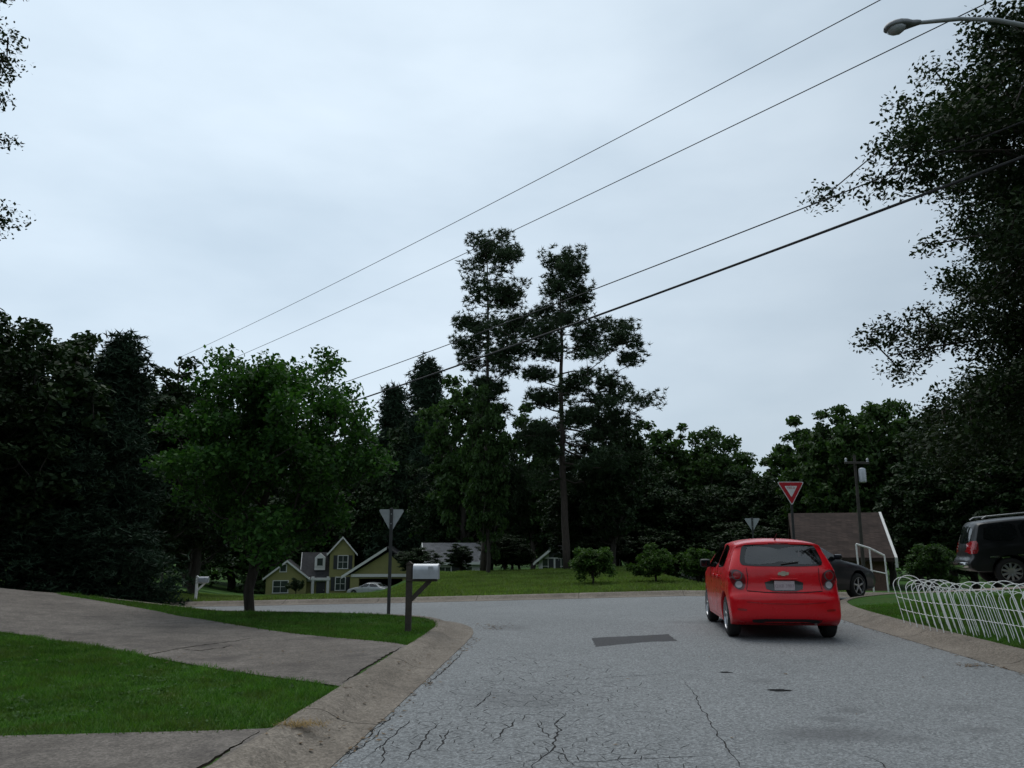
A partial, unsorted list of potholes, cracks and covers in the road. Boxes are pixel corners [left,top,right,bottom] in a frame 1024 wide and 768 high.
crack [345,653,741,768]
crack [146,636,264,655]
